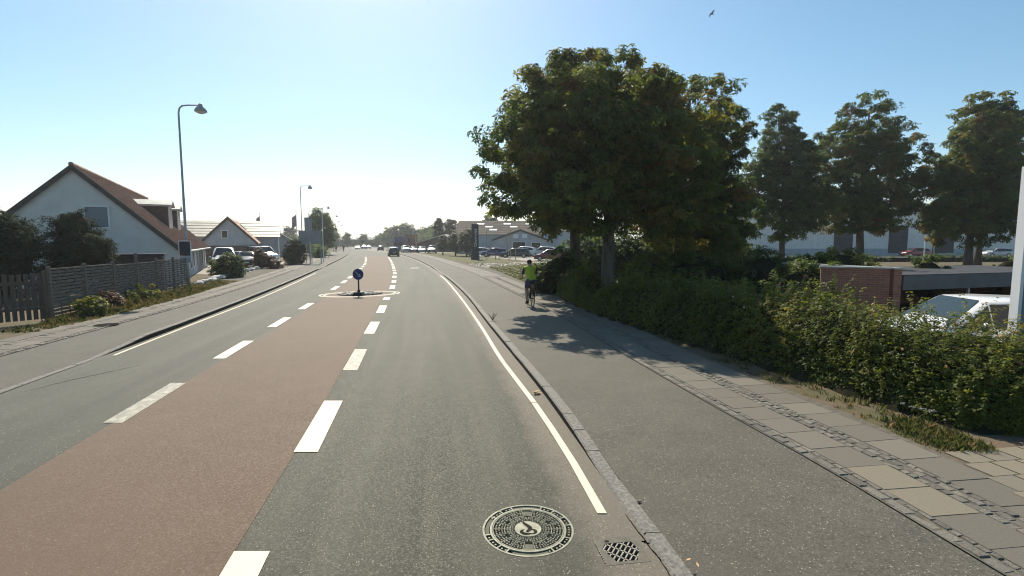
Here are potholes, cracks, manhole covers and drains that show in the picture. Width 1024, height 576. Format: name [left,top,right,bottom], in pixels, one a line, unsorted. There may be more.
manhole cover [482,505,574,557]
drain grate [592,536,651,566]
